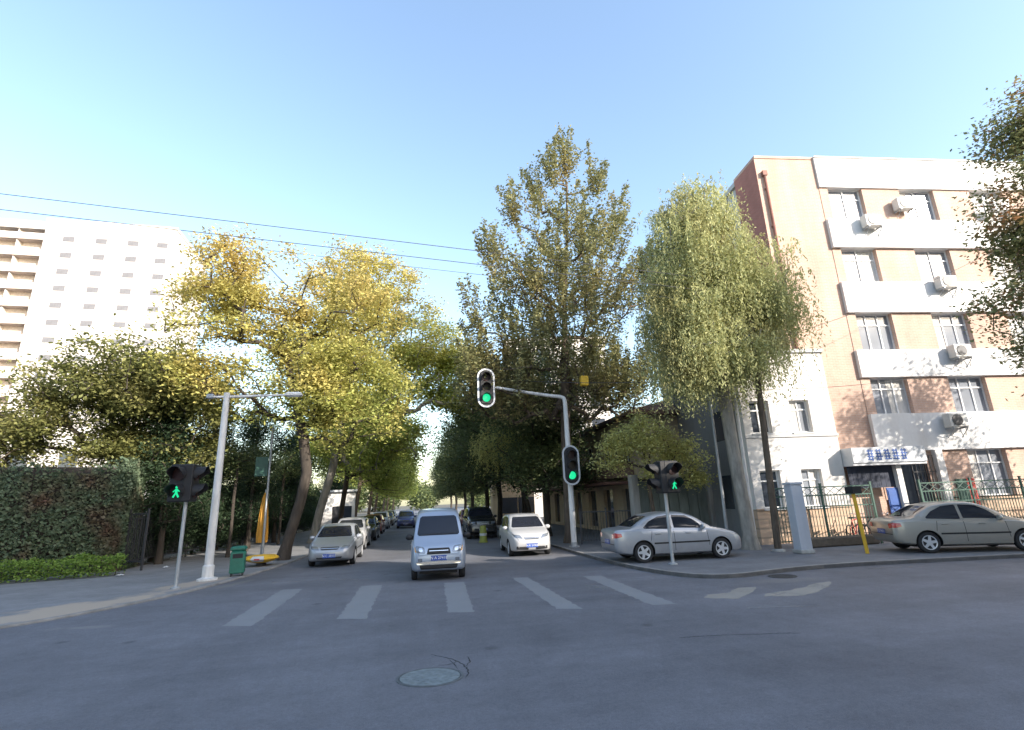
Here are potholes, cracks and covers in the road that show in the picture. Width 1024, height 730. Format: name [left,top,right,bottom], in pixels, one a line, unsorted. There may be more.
manhole cover [396,667,464,687]
crack [435,655,471,679]
